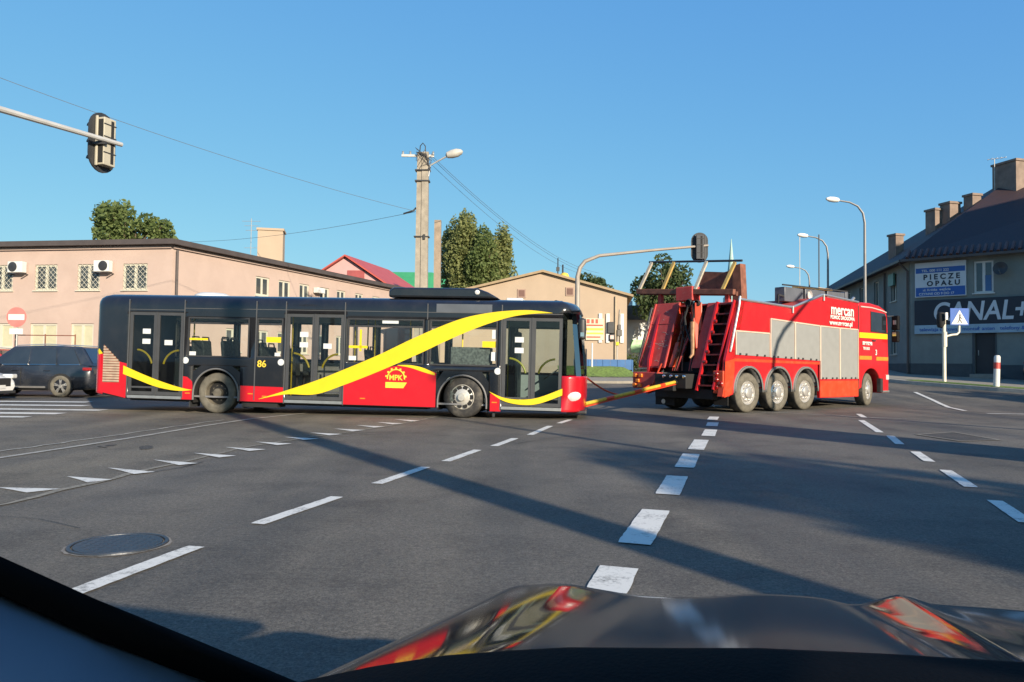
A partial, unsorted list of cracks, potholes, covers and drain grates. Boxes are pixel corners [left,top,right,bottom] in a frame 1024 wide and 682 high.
manhole cover [61,533,172,557]
